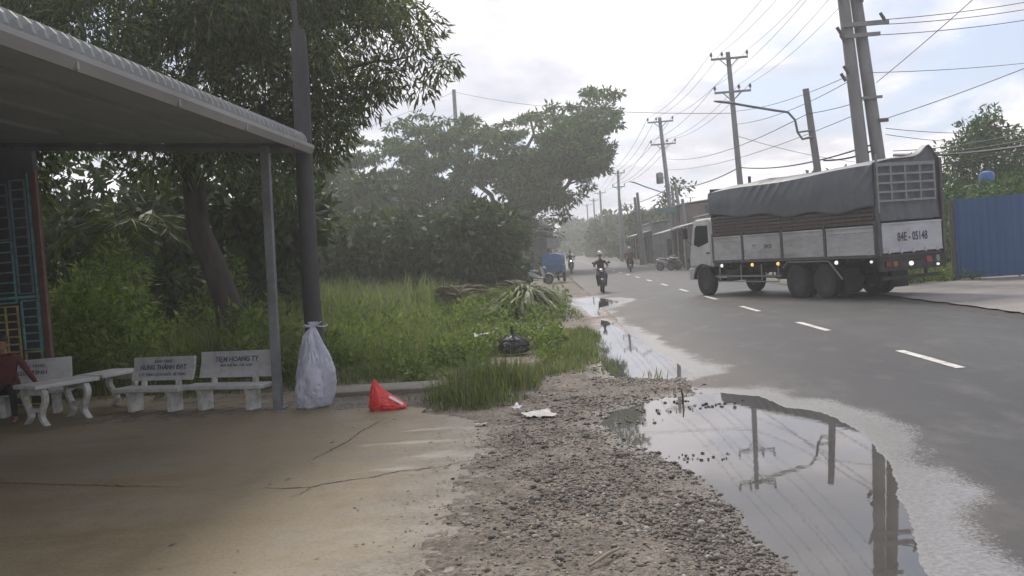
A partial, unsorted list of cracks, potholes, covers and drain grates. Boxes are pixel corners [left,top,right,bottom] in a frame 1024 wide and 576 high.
crack [279,460,469,497]
